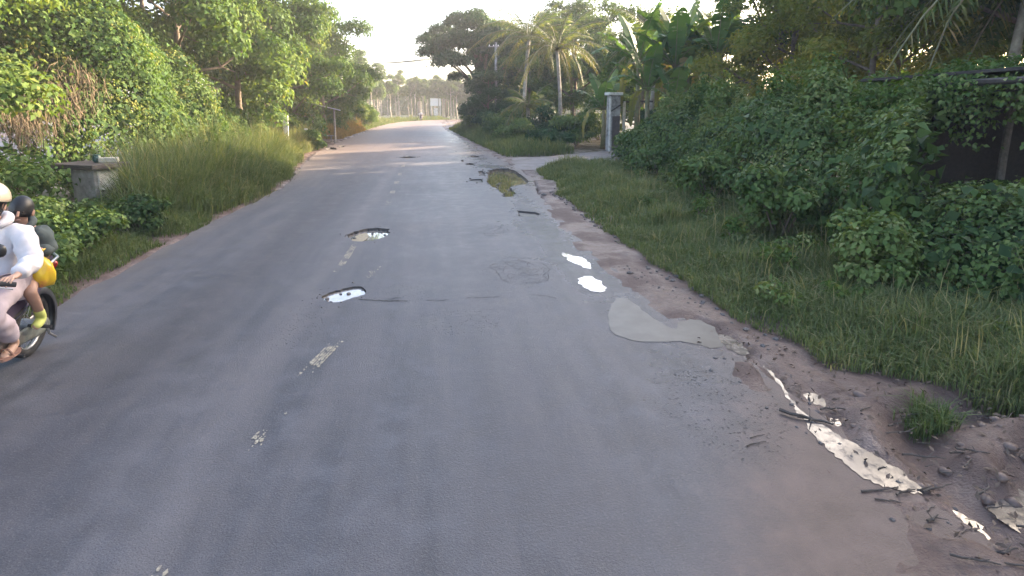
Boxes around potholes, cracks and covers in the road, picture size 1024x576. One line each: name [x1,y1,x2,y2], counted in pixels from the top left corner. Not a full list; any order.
pothole [486,168,529,197]
pothole [302,282,368,308]
pothole [340,226,392,243]
crack [361,257,557,301]
